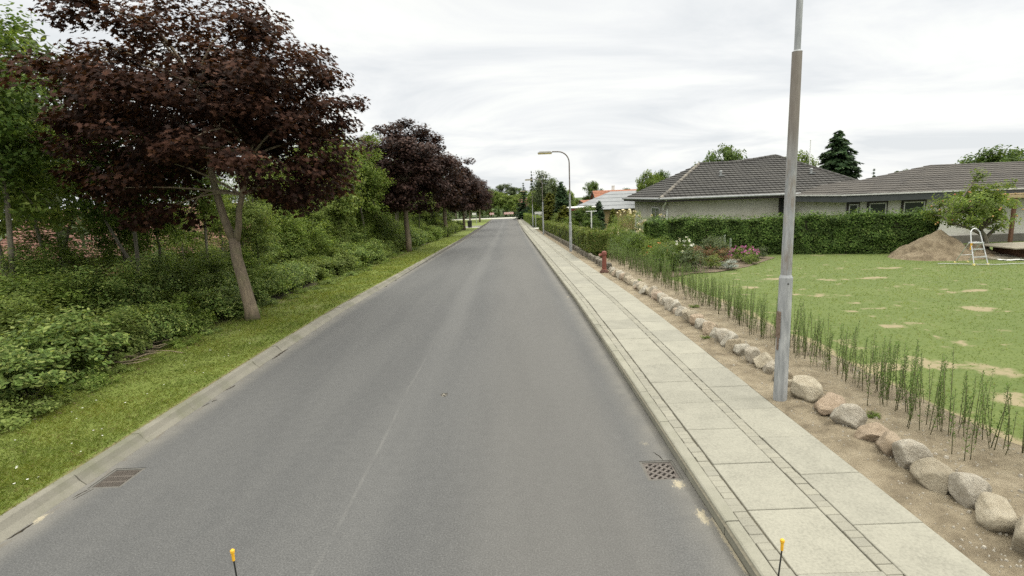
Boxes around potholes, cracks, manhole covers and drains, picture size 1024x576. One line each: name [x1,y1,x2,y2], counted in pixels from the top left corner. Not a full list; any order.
drain grate [88,468,145,489]
drain grate [639,460,683,481]
